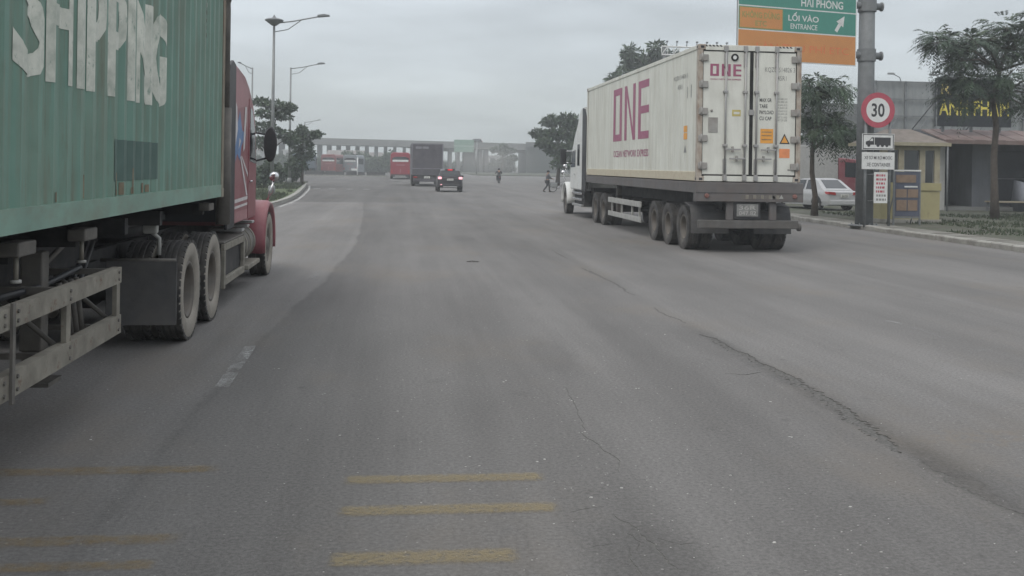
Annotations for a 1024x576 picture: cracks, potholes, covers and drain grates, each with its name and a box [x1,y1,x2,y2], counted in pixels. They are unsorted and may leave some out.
crack [573,506,691,576]
crack [552,250,1024,518]
